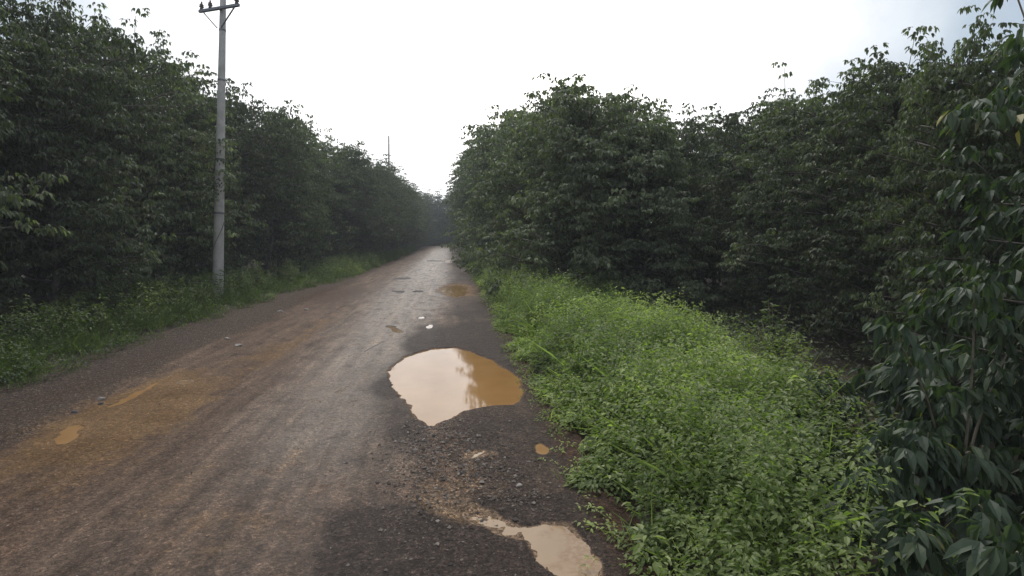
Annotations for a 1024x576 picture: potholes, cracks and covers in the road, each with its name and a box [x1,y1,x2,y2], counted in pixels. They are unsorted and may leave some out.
pothole [439,503,611,576]
pothole [433,284,477,298]
pothole [385,347,528,427]
pothole [531,441,553,455]
pothole [46,422,89,446]
